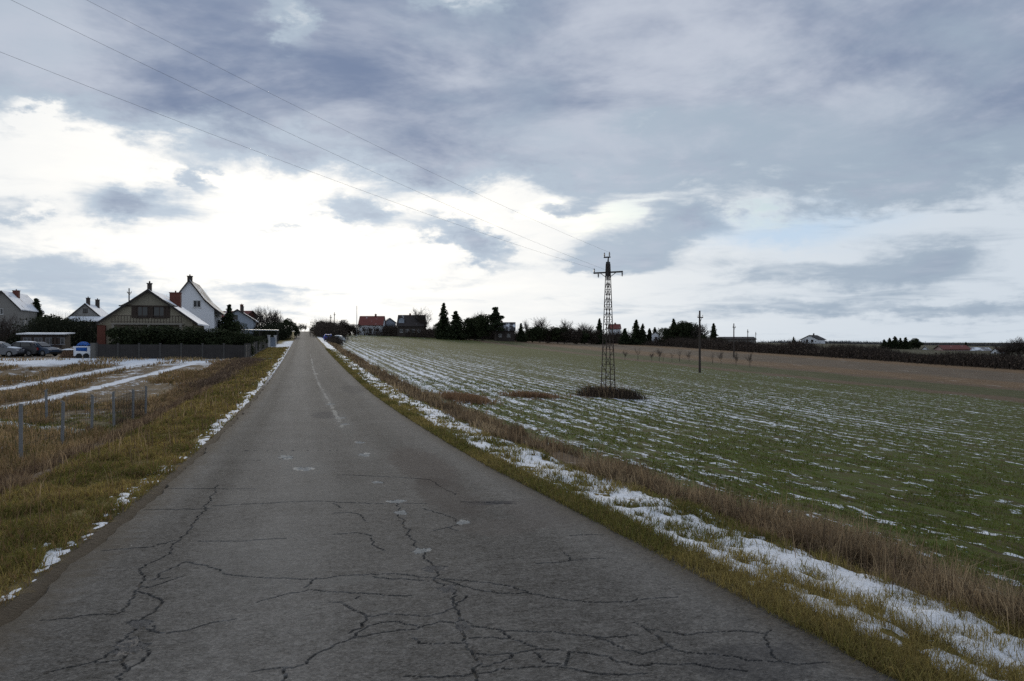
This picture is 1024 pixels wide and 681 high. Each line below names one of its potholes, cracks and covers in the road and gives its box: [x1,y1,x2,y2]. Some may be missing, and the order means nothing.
crack [105,488,216,672]
